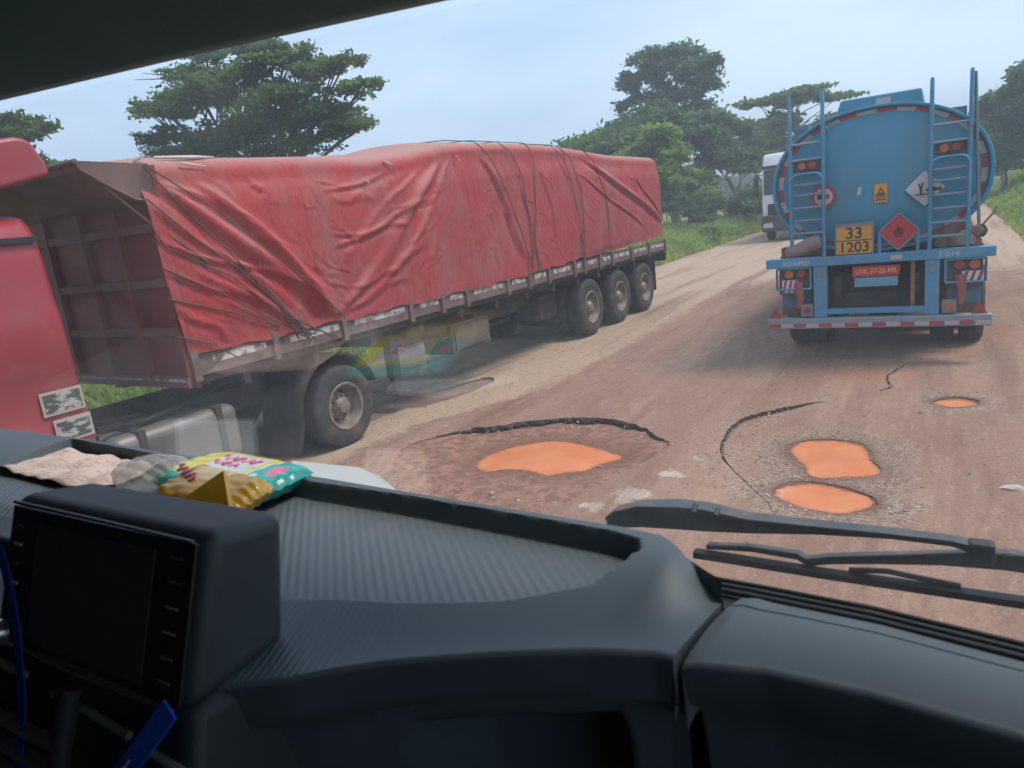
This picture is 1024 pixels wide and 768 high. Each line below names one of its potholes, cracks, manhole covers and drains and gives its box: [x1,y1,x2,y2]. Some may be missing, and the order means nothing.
pothole [784,439,882,478]
pothole [392,417,670,513]
crack [720,401,825,514]
pothole [932,397,979,407]
crack [880,363,907,391]
pothole [773,481,878,514]
